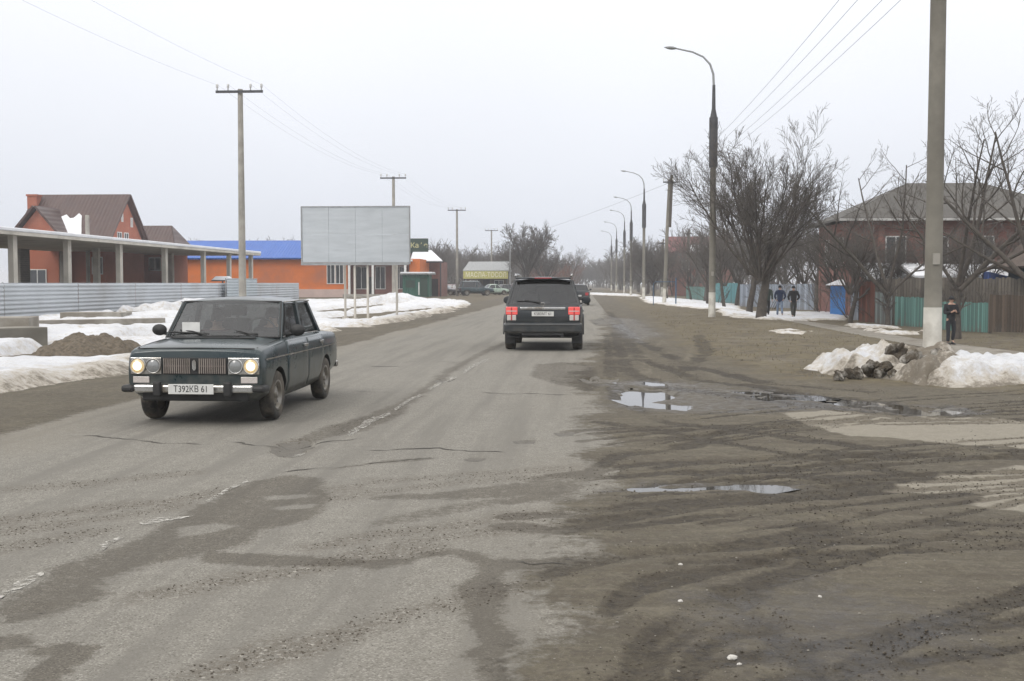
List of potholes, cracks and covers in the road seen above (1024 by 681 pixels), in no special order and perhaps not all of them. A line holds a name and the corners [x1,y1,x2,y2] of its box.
crack [285,447,501,472]
pothole [617,387,679,400]
